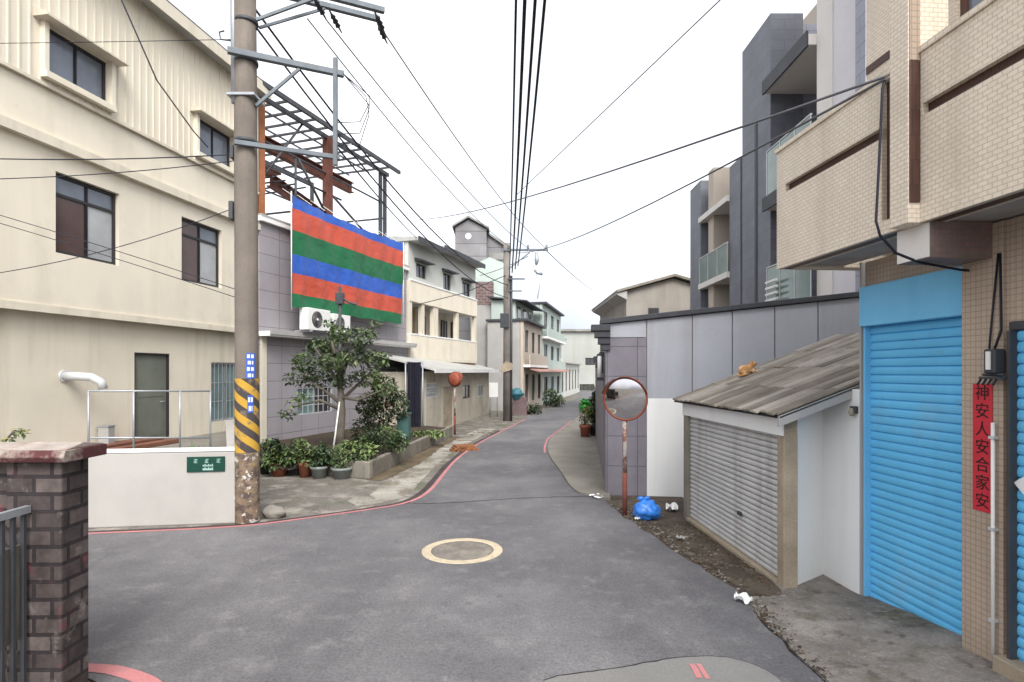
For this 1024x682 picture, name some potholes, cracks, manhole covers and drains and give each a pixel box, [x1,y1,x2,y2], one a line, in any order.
manhole cover [422,538,503,564]
